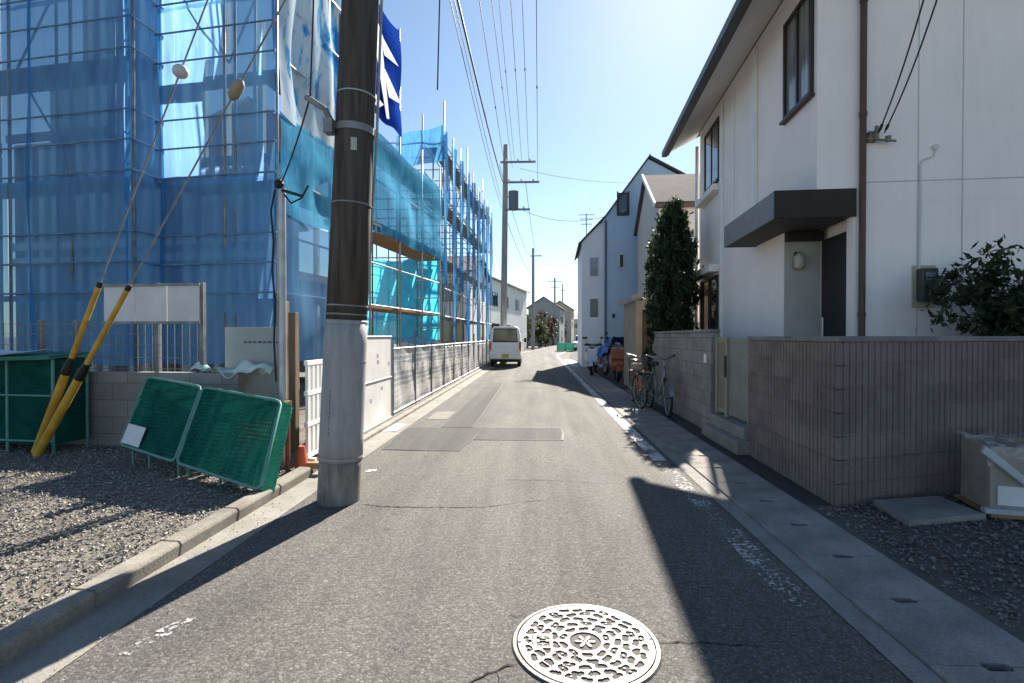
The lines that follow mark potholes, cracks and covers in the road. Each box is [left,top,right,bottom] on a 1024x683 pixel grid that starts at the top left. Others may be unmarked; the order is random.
manhole cover [511,604,662,683]
crack [469,663,518,683]
crack [659,632,769,648]
